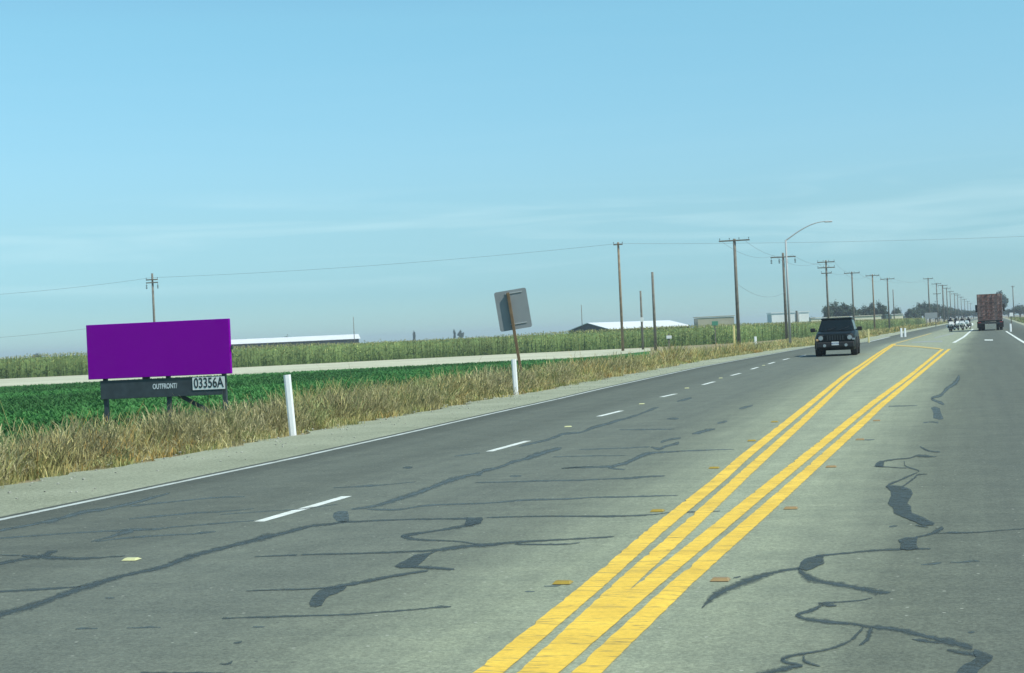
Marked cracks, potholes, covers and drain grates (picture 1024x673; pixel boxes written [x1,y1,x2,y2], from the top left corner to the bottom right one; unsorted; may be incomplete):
crack [222,605,451,643]
crack [0,467,412,542]
crack [476,397,691,483]
